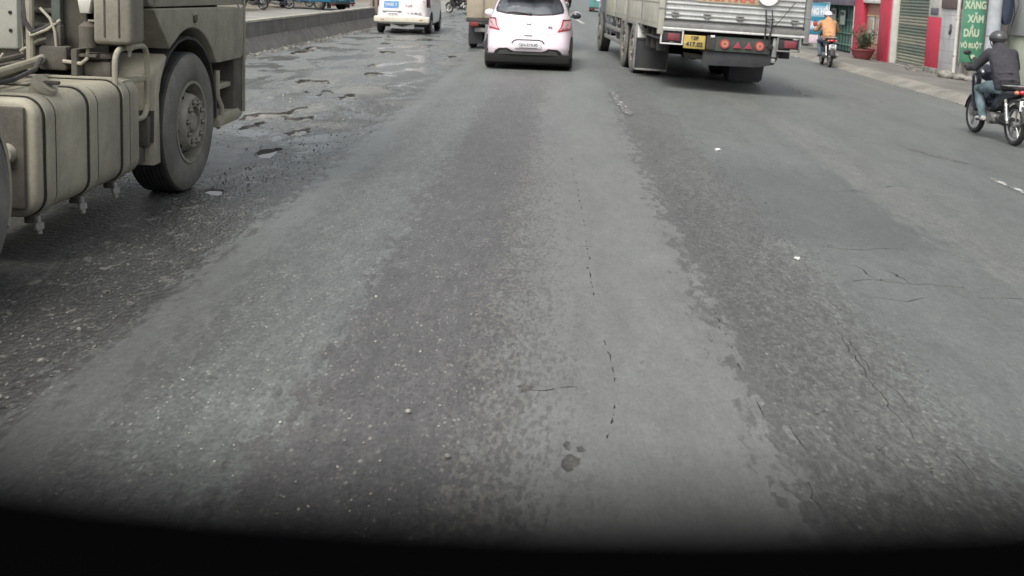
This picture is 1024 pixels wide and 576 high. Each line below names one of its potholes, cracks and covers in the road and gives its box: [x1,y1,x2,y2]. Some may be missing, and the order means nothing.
crack [830,323,918,445]
pothole [201,188,224,196]
crack [571,159,615,439]
pothole [284,128,311,137]
pothole [254,148,283,158]
crack [785,242,1018,302]
